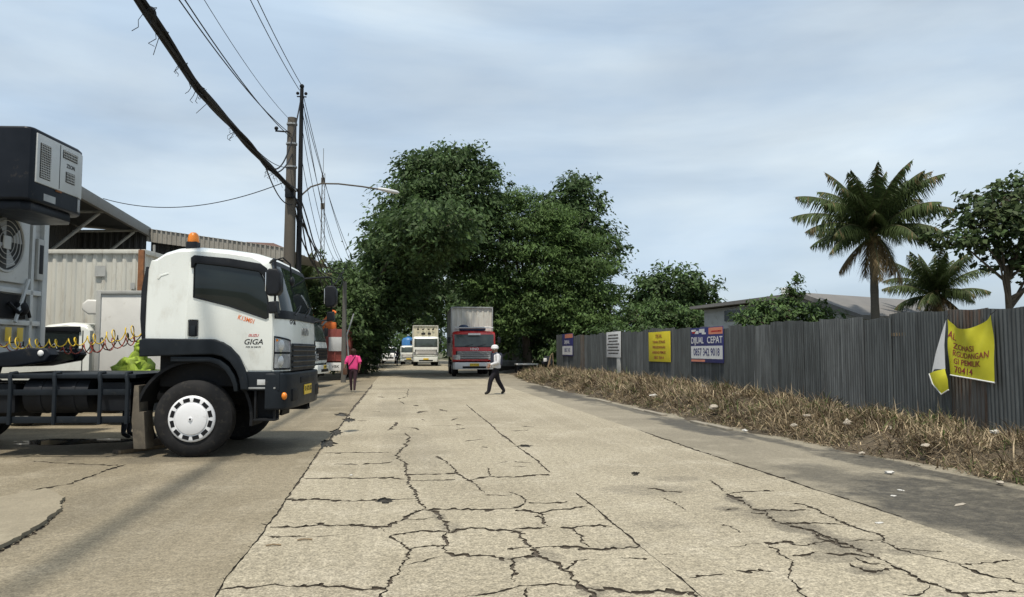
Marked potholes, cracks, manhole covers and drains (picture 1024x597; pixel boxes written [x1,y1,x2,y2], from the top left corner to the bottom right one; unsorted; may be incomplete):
crack [0,461,126,553]
crack [214,385,1024,597]
